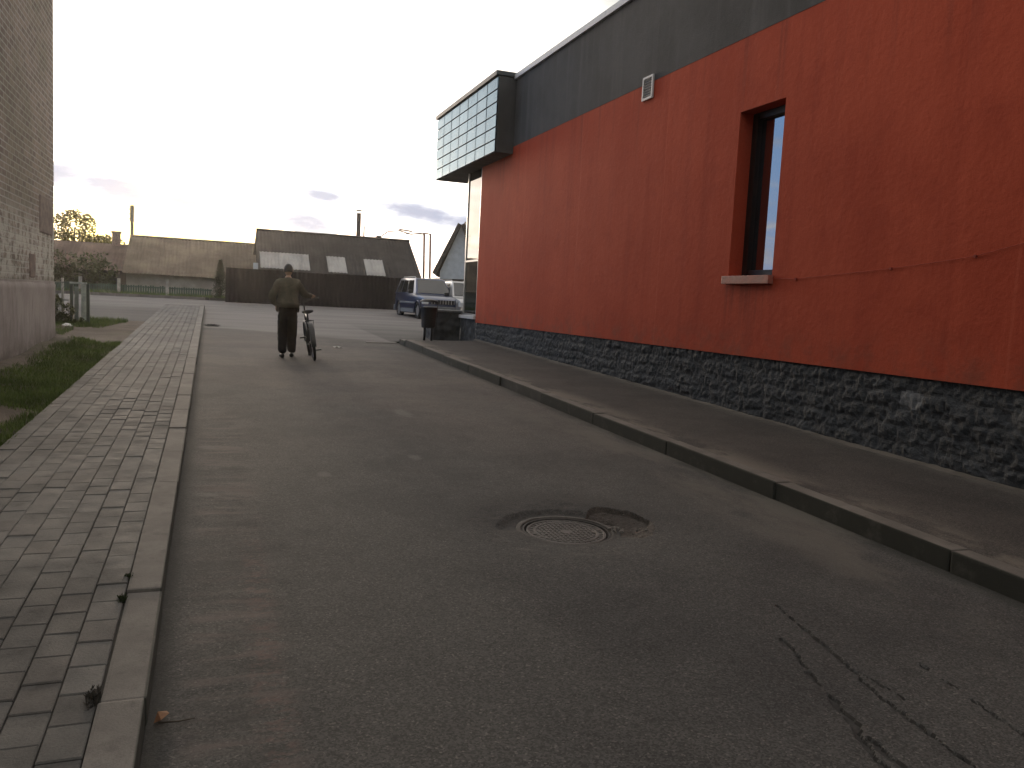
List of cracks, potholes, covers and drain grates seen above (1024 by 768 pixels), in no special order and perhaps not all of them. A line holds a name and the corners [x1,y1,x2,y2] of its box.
pothole [585,507,656,538]
crack [920,665,1024,738]
crack [775,605,976,768]
manhole cover [516,516,615,545]
